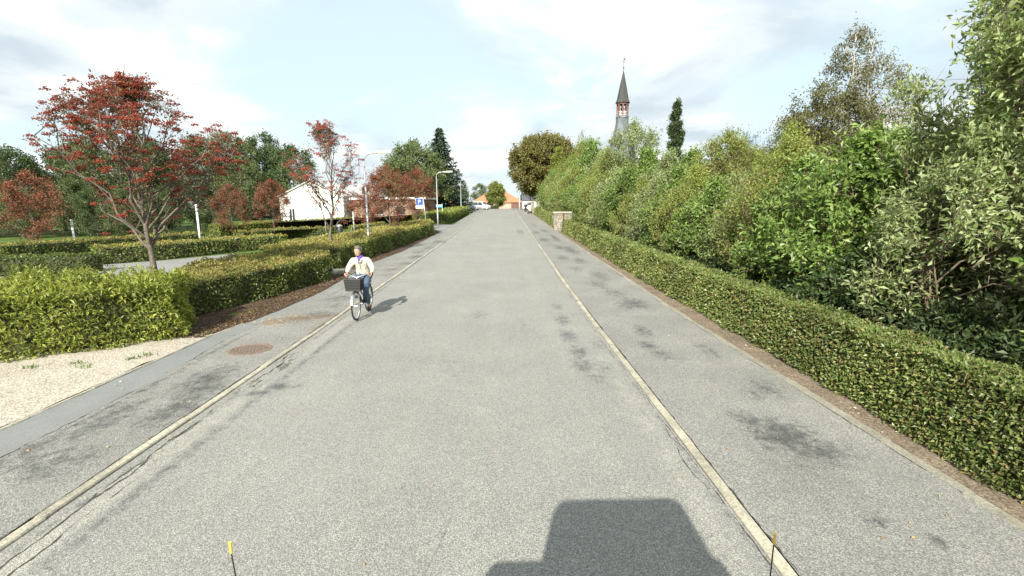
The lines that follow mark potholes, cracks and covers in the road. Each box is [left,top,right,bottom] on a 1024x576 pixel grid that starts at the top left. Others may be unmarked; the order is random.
manhole cover [228,343,273,356]
